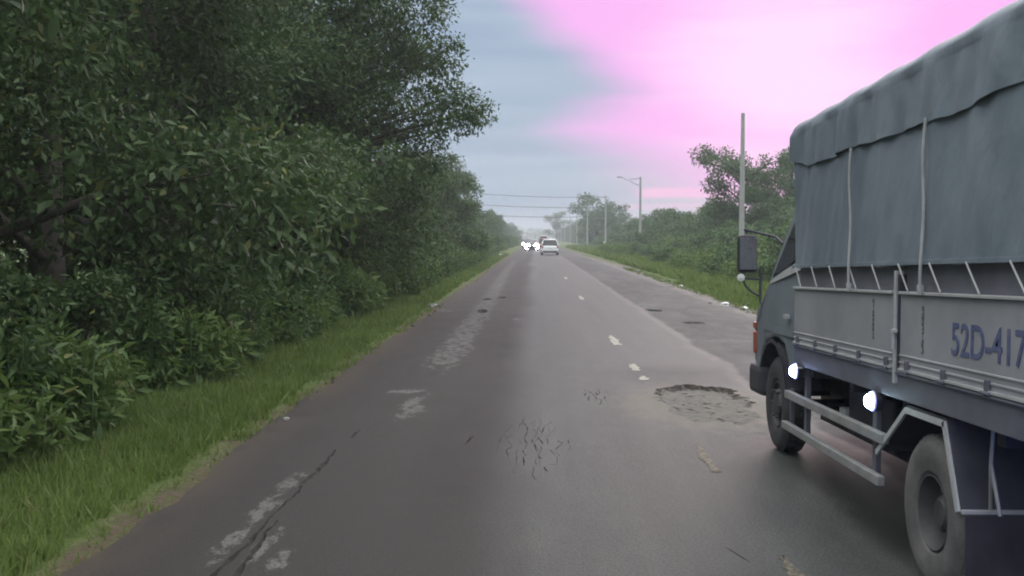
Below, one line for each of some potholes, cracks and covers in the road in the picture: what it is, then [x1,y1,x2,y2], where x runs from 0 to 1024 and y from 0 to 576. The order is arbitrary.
crack [209,430,360,576]
crack [496,417,570,480]
pothole [653,384,763,426]
